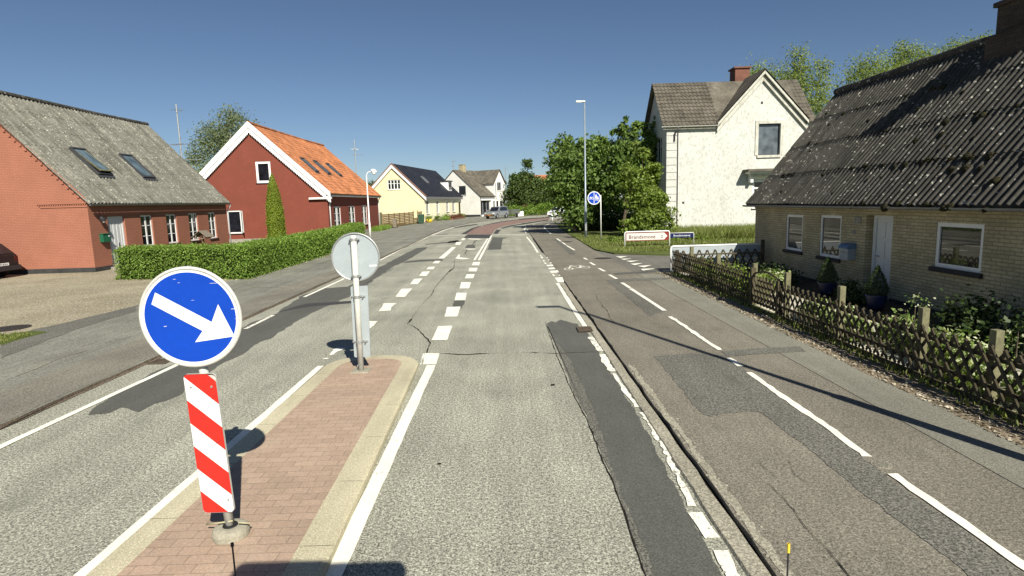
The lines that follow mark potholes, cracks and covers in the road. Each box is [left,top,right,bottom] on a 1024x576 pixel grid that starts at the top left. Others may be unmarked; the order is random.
crack [761,461,850,576]
